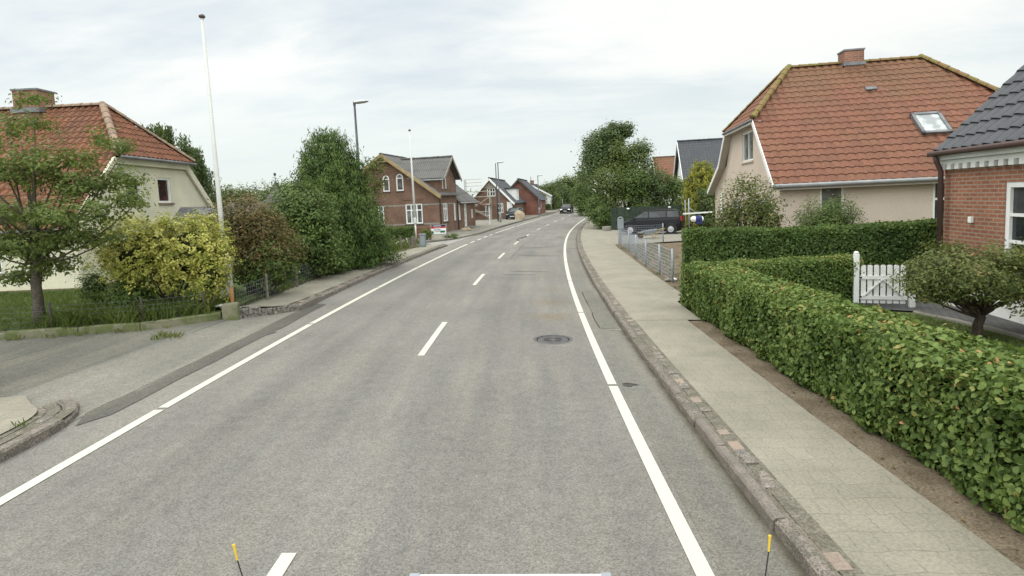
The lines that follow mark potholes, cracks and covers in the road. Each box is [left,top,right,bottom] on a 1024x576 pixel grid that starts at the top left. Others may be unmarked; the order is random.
manhole cover [533,334,573,344]
